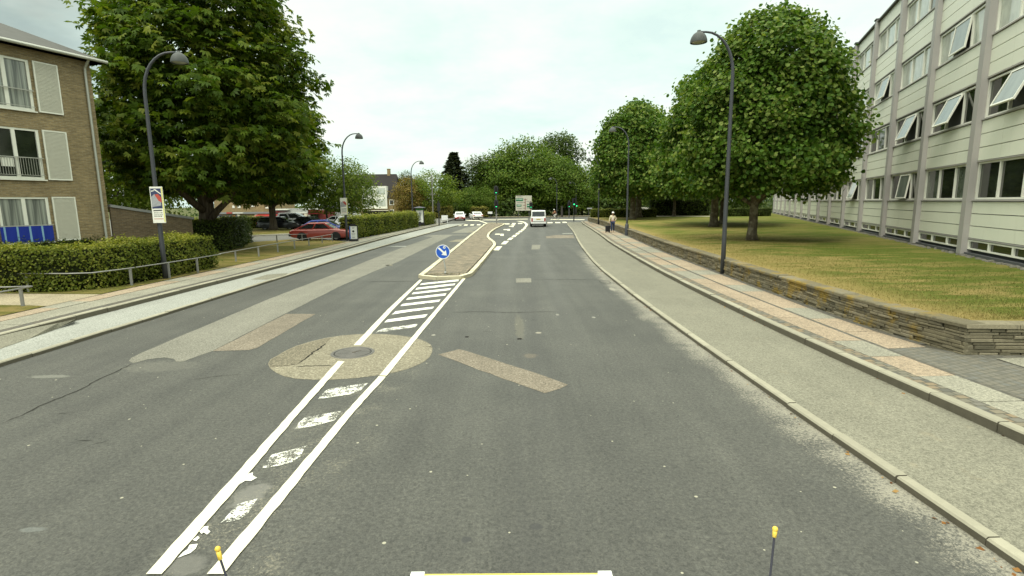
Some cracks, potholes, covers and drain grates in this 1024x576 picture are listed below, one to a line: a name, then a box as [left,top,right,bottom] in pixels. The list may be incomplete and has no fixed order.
manhole cover [330,347,375,359]
crack [284,344,332,367]
